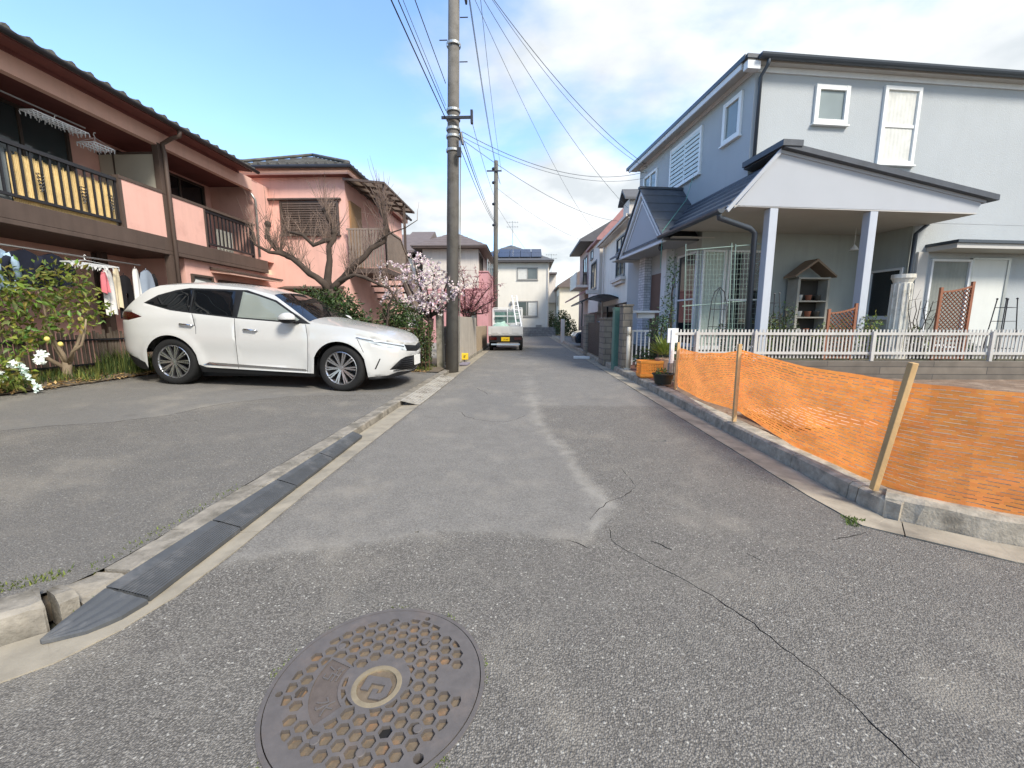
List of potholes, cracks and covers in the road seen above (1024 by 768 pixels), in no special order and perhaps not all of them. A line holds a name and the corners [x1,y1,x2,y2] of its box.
manhole cover [254,608,485,768]
crack [610,530,920,768]
